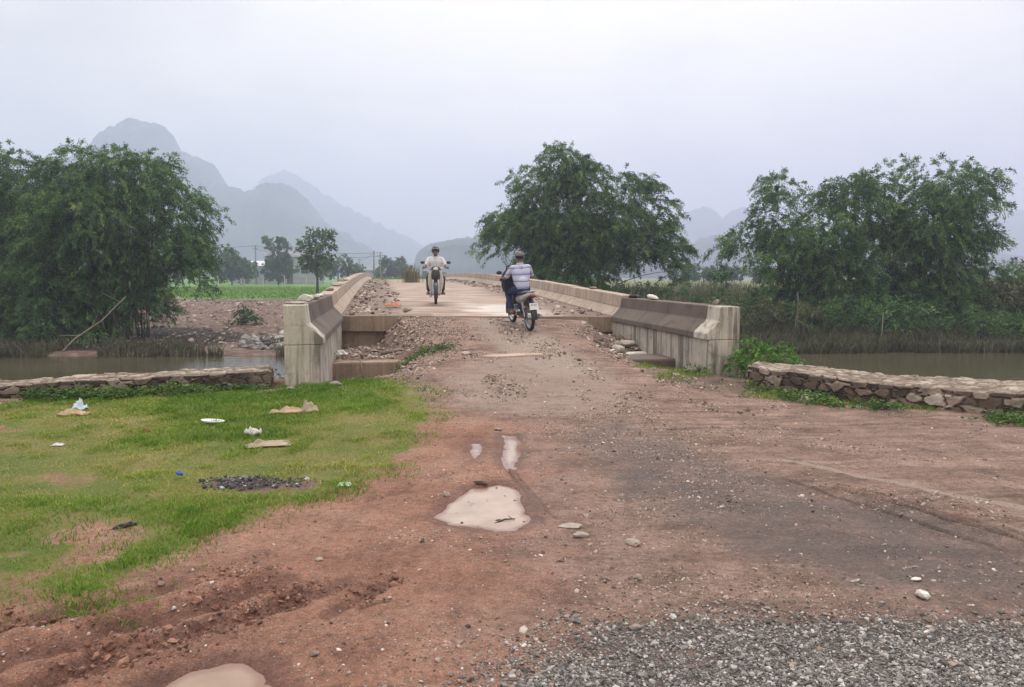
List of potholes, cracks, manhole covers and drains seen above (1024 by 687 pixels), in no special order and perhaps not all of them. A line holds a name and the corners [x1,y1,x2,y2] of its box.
pothole [464,441,488,461]
pothole [491,434,528,470]
pothole [423,481,545,534]
